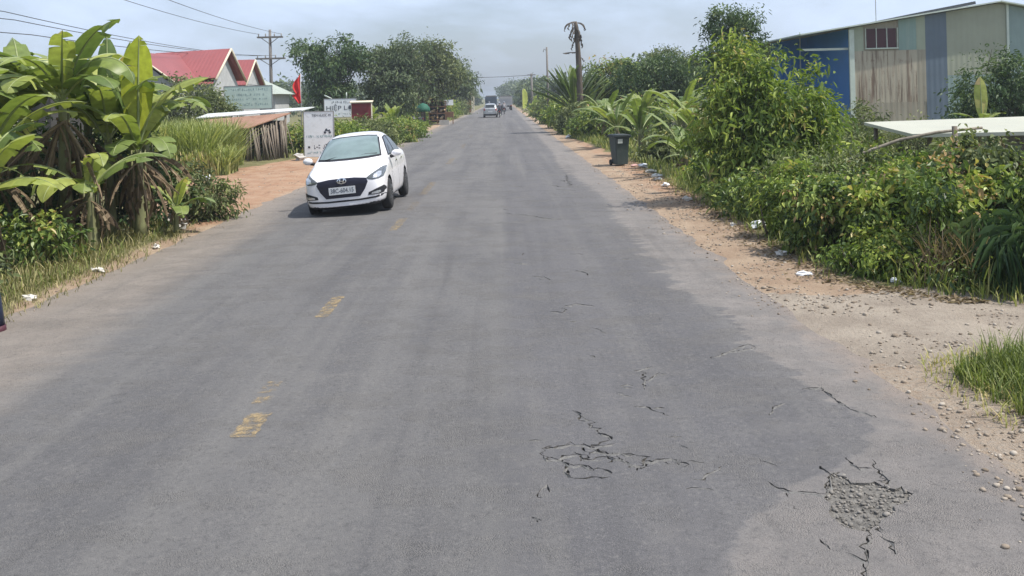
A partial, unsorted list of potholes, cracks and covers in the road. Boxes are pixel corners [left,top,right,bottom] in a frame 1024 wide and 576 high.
crack [760,458,890,509]
pothole [824,472,913,532]
crack [551,303,594,323]
crack [532,410,722,498]
crack [820,525,898,576]
crack [617,367,667,416]
